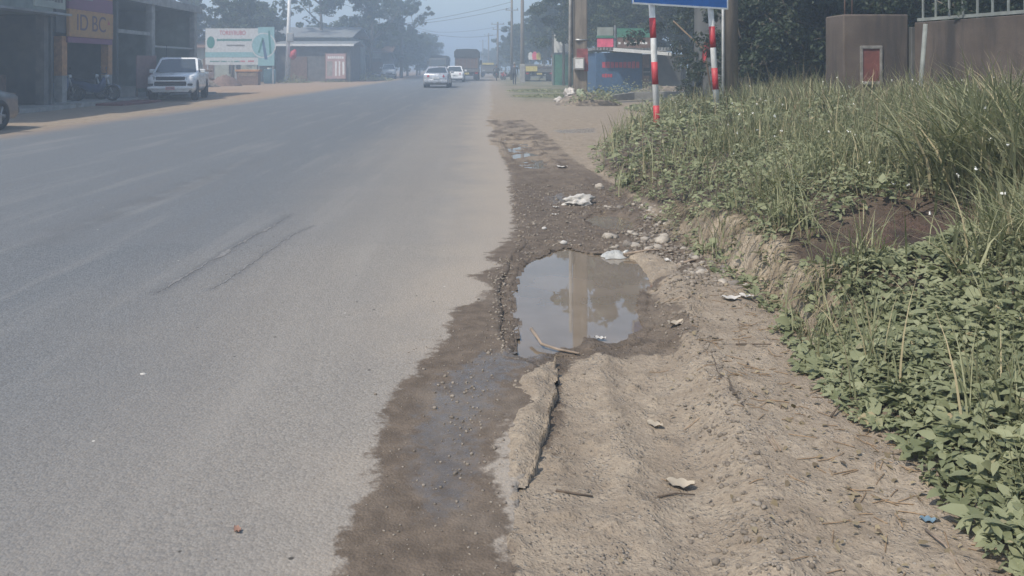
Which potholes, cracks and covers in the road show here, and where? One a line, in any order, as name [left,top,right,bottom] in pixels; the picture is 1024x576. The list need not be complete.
crack [158,214,311,292]
pothole [502,244,678,363]
